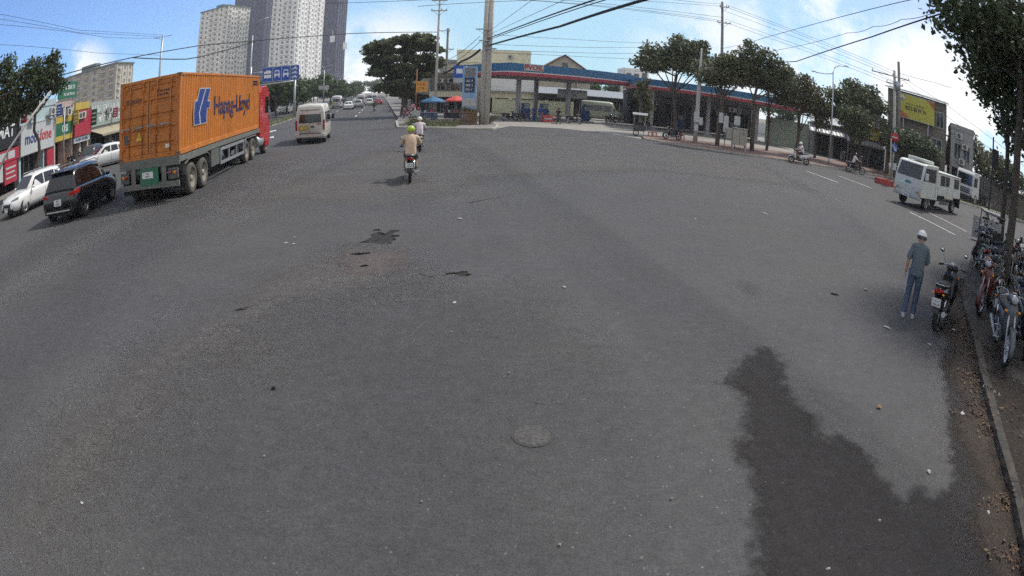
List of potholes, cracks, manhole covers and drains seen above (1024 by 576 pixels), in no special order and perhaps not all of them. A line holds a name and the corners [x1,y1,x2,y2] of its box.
pothole [359,229,400,244]
manhole cover [511,423,554,448]
